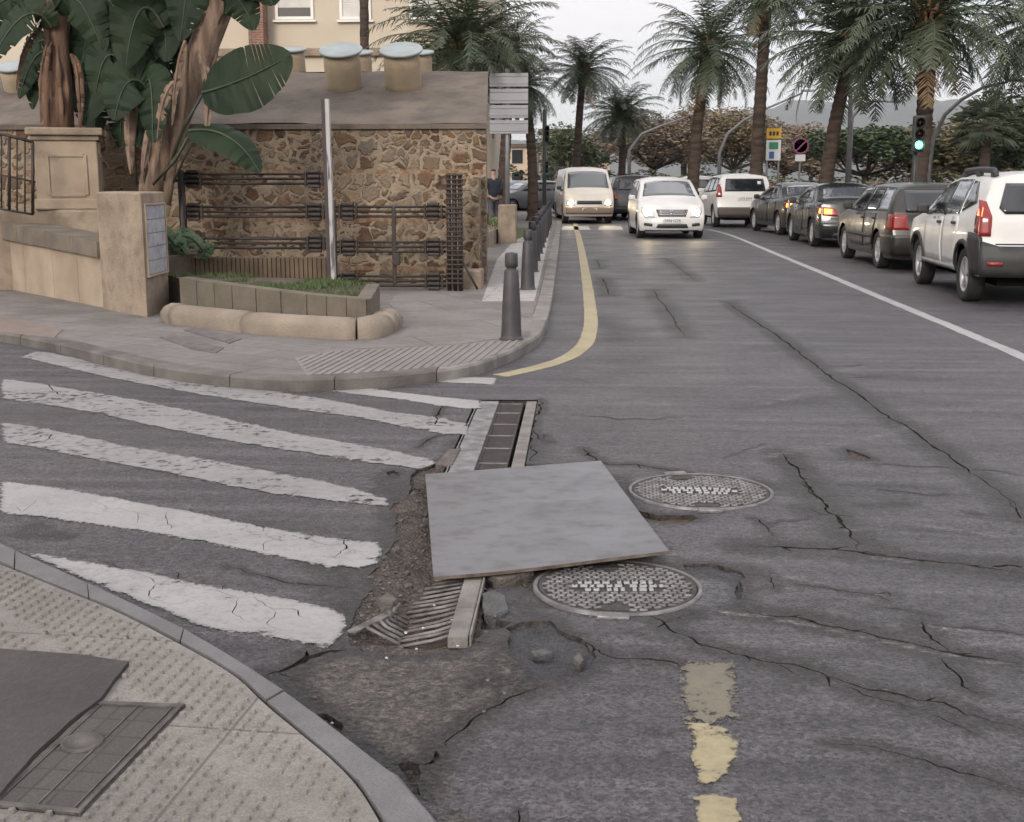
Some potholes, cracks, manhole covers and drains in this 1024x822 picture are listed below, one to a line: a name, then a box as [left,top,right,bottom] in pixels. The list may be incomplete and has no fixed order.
manhole cover [628,471,774,513]
utility cover [0,701,186,817]
crack [841,744,1022,790]
pothole [506,621,596,681]
pothole [348,464,537,656]
crack [724,444,1022,573]
crack [733,306,1022,519]
crack [423,687,539,765]
manhole cover [533,560,703,620]
crack [229,566,345,588]
crack [583,448,676,471]
drain grate [348,576,488,648]
